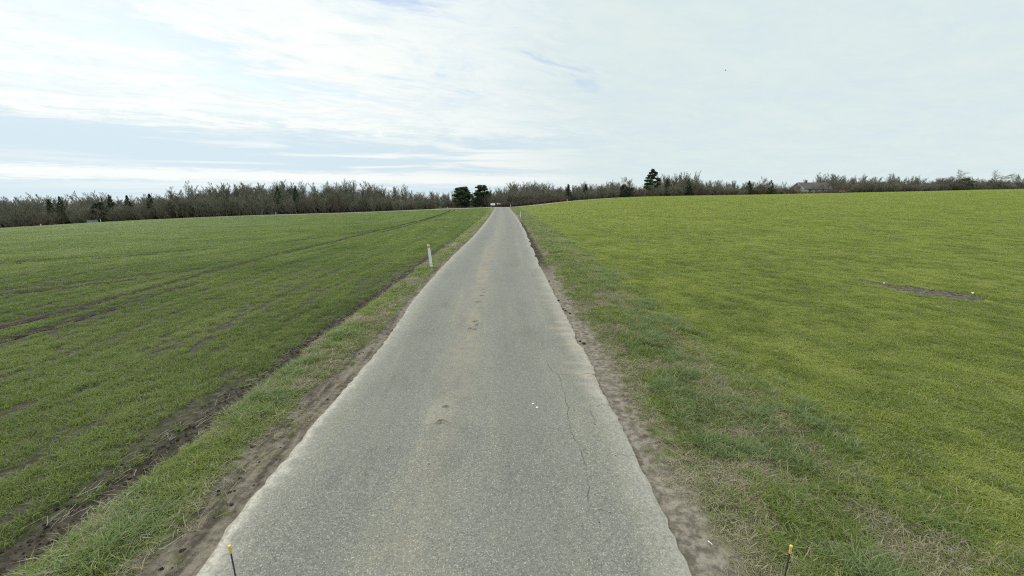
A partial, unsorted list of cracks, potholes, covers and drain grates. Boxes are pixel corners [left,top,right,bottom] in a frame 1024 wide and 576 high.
crack [547,363,634,522]
